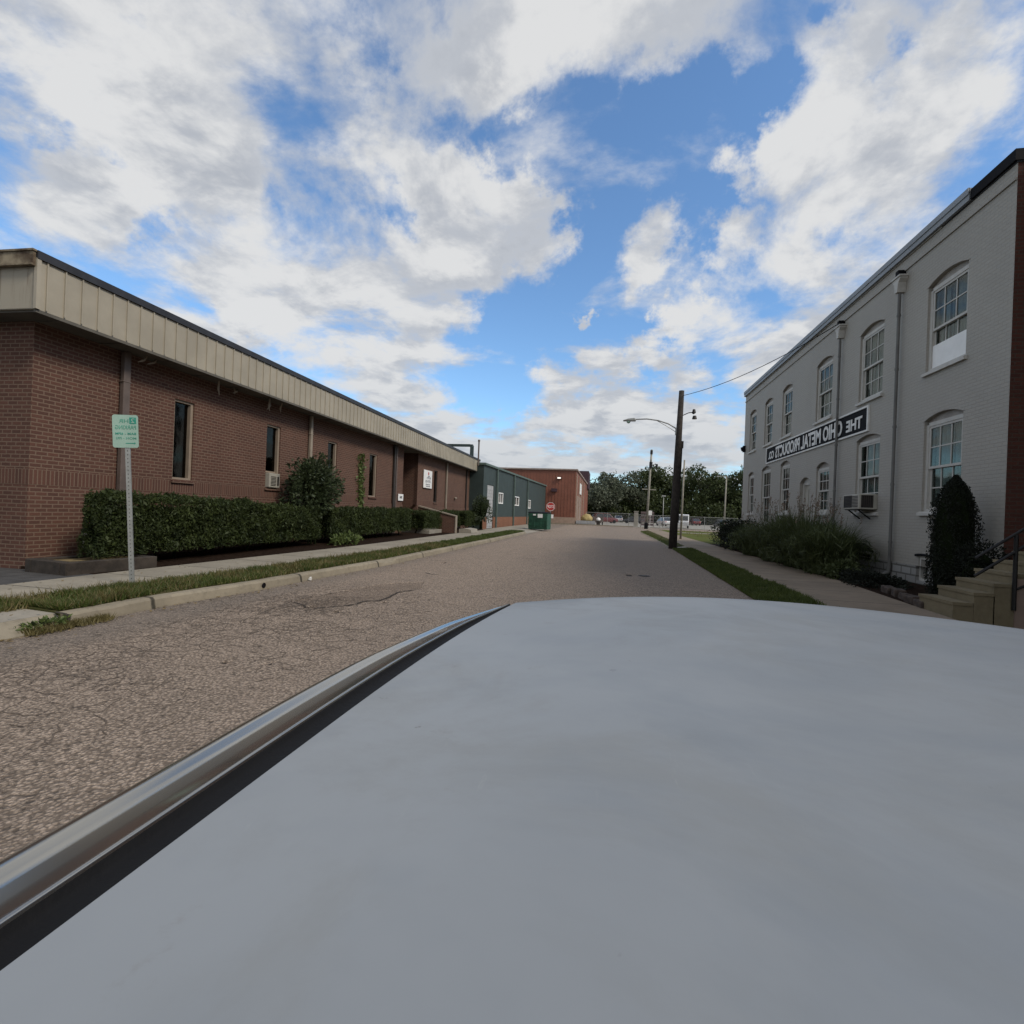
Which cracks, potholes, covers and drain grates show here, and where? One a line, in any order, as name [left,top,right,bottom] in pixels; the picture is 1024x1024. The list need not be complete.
crack [0,560,469,749]
